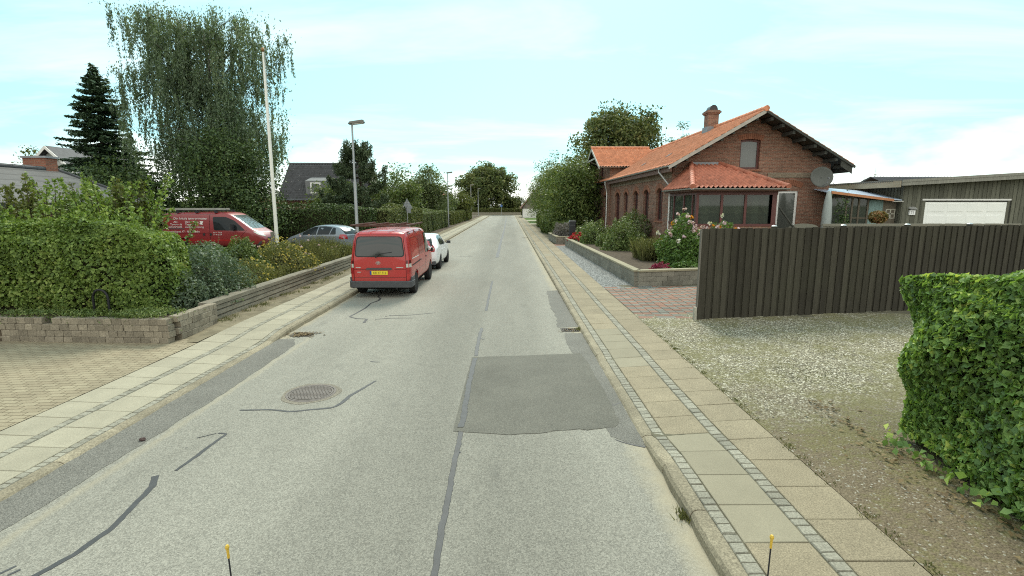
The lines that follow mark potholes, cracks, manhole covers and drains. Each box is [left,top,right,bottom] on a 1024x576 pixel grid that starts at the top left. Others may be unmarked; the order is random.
manhole cover [281,384,342,405]
